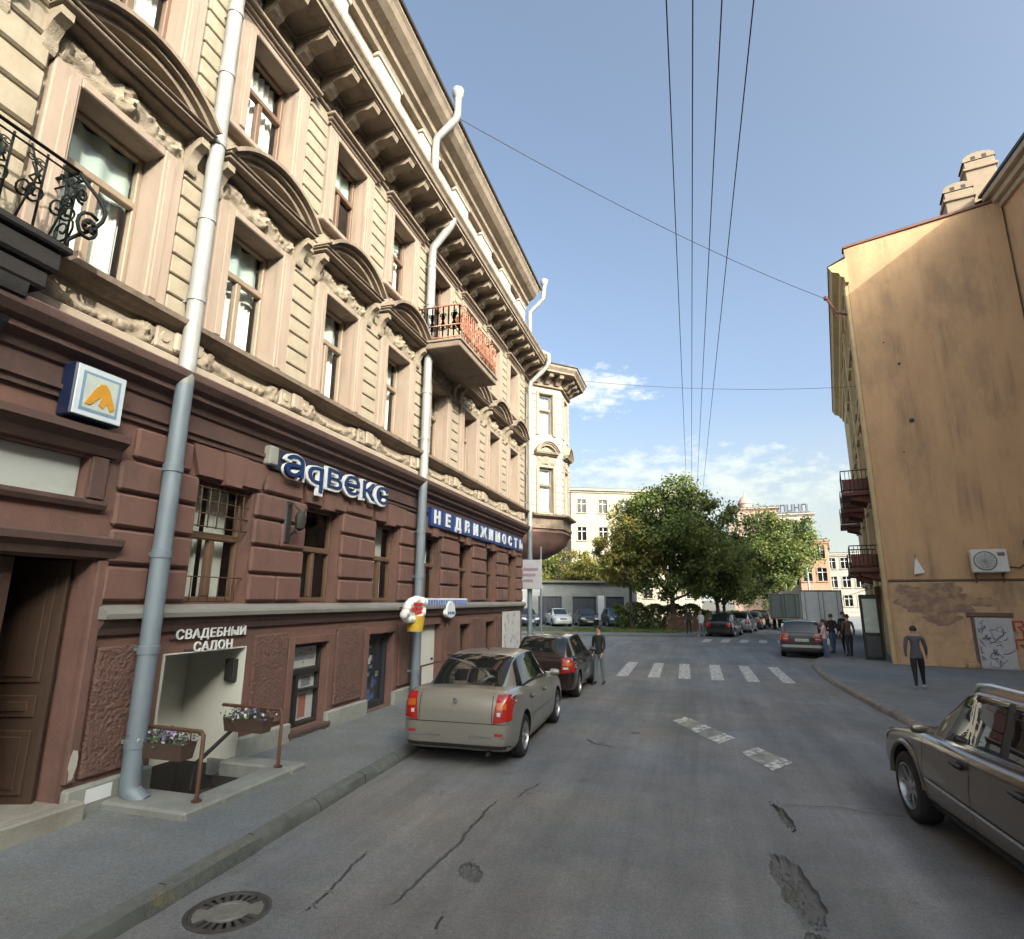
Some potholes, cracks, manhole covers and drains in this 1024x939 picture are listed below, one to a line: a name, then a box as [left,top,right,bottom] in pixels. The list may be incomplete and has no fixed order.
manhole cover [170,887,283,939]
crack [584,738,617,748]
pothole [770,801,798,831]
crack [294,782,545,935]
pothole [452,859,489,886]
pothole [765,850,833,931]
